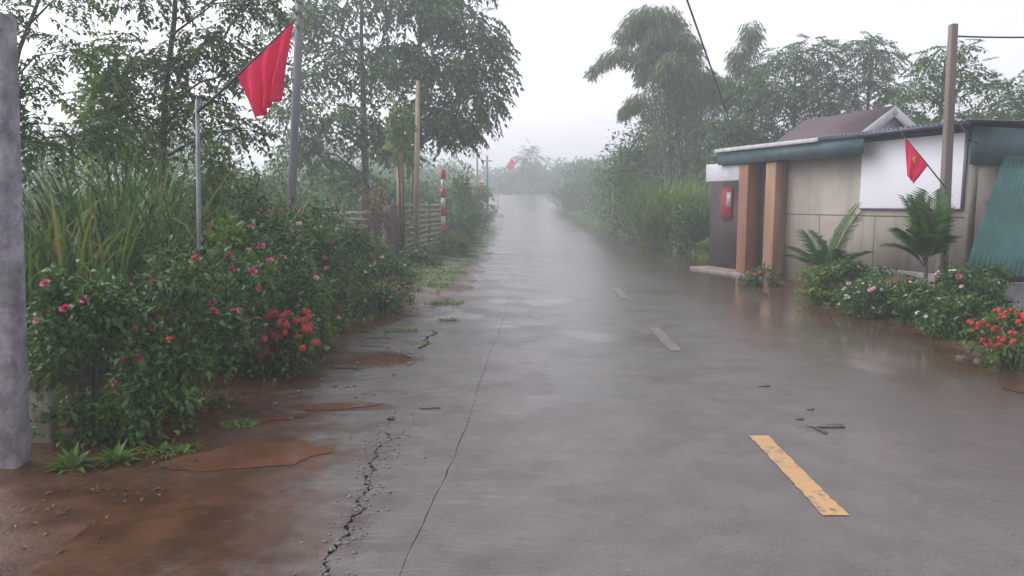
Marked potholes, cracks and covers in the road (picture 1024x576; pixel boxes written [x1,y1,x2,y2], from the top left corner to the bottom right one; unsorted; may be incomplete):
crack [293,410,427,576]
